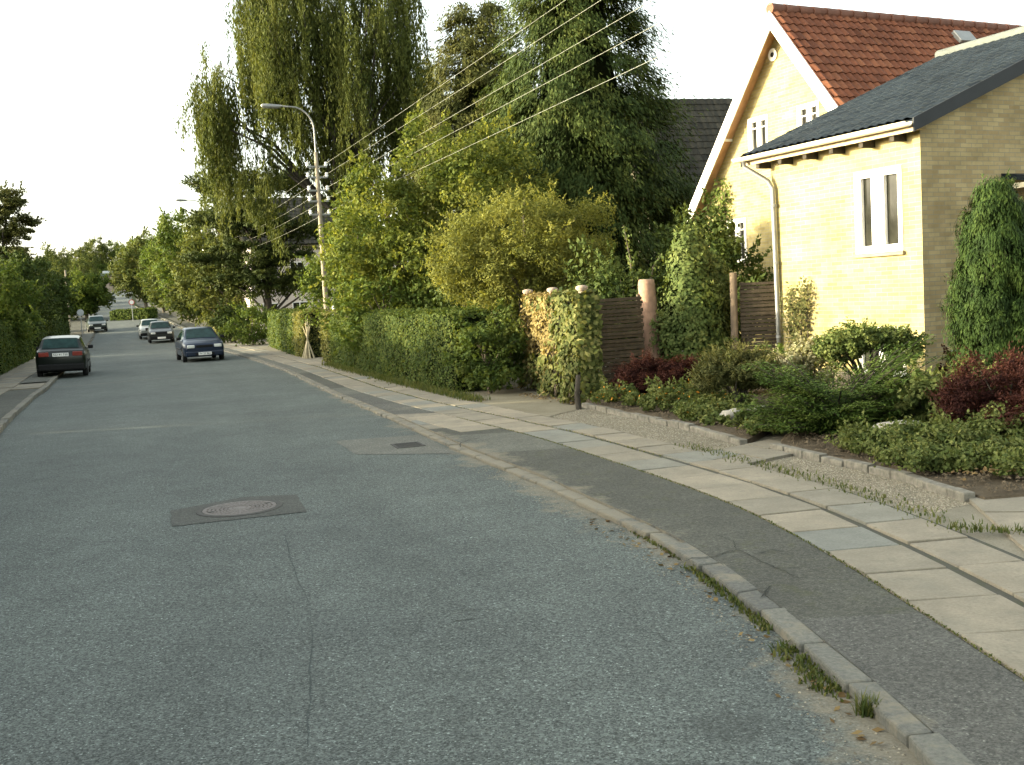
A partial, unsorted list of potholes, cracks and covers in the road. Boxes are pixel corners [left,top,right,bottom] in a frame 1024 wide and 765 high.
crack [285,535,313,746]
manhole cover [196,499,283,517]
crack [685,536,826,597]
drain grate [390,441,426,449]
